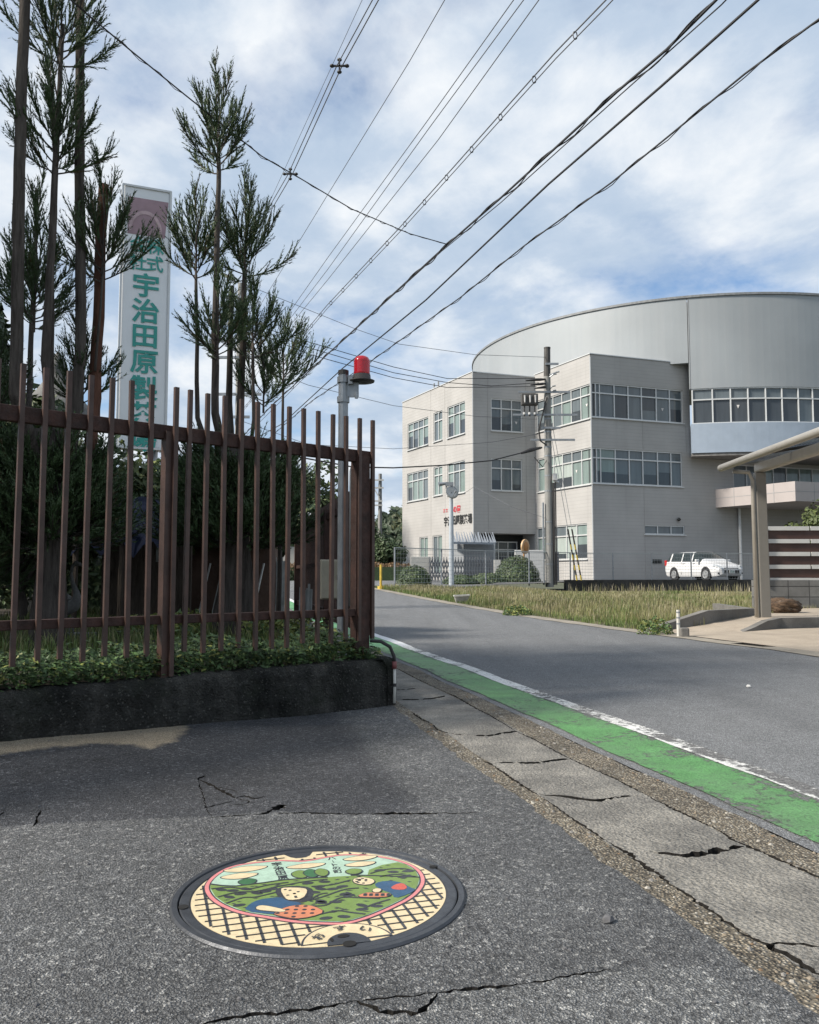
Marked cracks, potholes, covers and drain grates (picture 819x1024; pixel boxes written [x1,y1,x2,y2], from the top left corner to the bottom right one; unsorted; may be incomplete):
crack [197,776,266,816]
crack [203,969,611,1024]
crack [399,669,819,975]
manhole cover [169,845,466,960]
